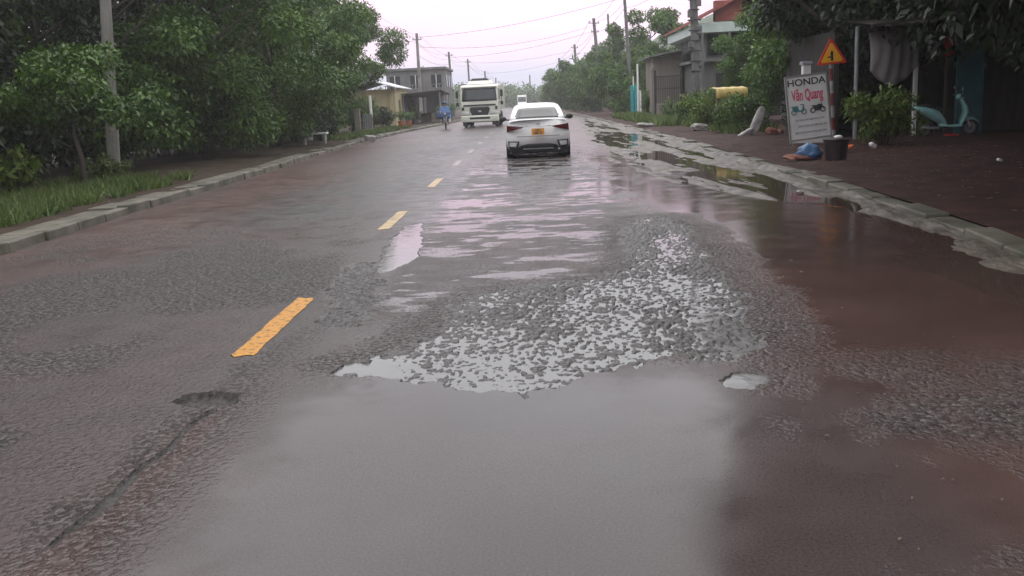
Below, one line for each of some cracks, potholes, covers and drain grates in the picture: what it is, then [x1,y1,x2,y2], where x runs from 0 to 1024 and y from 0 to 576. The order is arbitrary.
pothole [326,217,769,399]
pothole [170,390,241,408]
crack [41,409,218,552]
